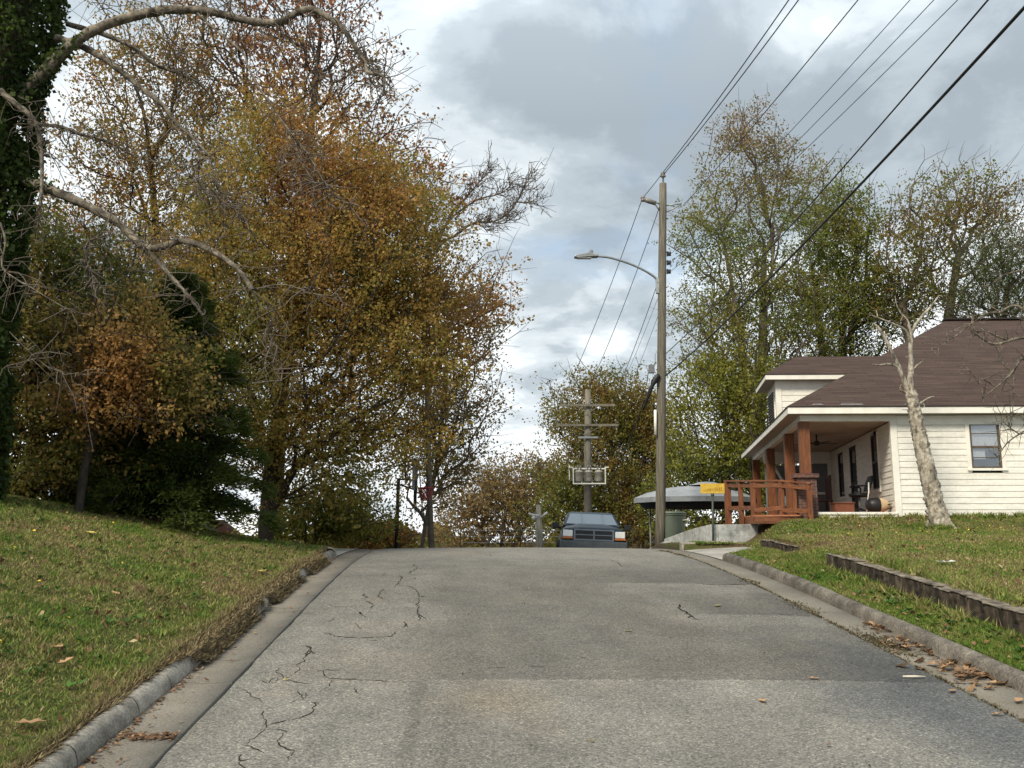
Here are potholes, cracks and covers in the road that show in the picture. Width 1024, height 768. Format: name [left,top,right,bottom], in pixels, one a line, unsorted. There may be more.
crack [327,565,426,641]
crack [237,646,418,768]
